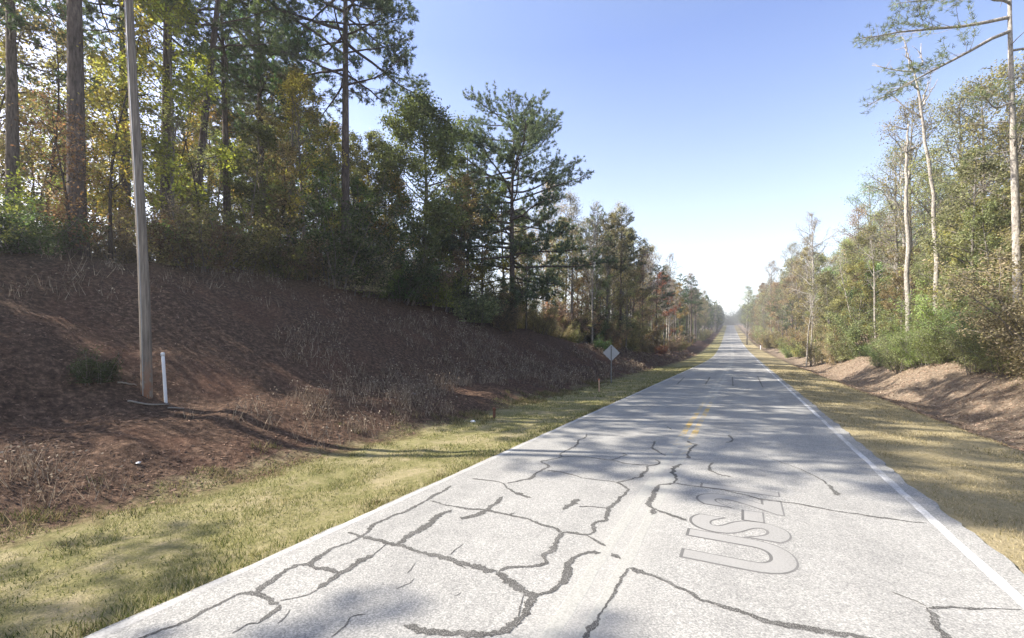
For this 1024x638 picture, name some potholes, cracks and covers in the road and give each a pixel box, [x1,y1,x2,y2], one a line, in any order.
crack [139,426,925,638]
crack [893,592,1022,638]
